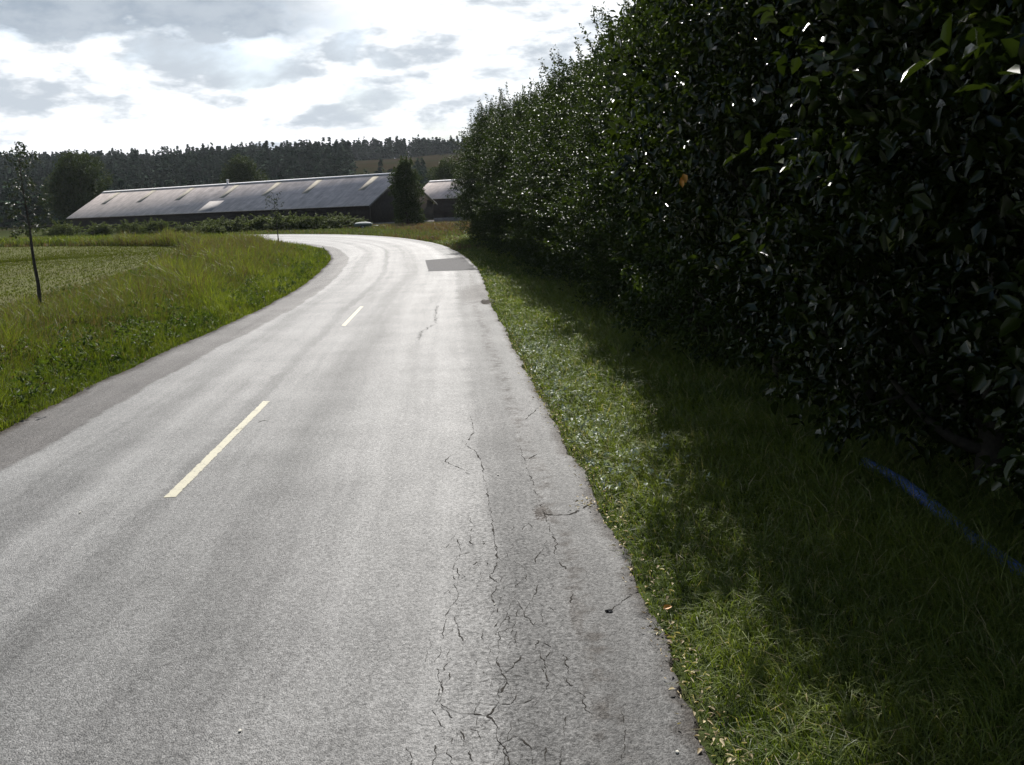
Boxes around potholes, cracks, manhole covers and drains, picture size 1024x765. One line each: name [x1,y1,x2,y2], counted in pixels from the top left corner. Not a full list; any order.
crack [406,419,596,765]
